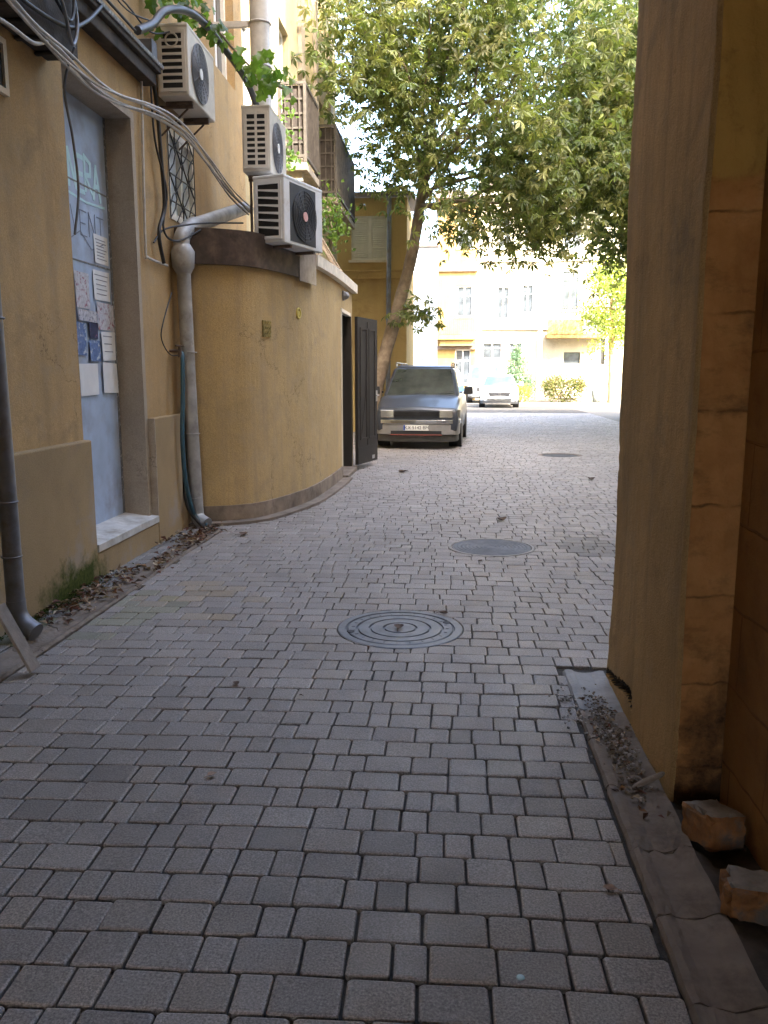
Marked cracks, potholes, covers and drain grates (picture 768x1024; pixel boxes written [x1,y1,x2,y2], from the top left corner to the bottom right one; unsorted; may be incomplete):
manhole cover [449,538,535,557]
manhole cover [338,610,463,651]
